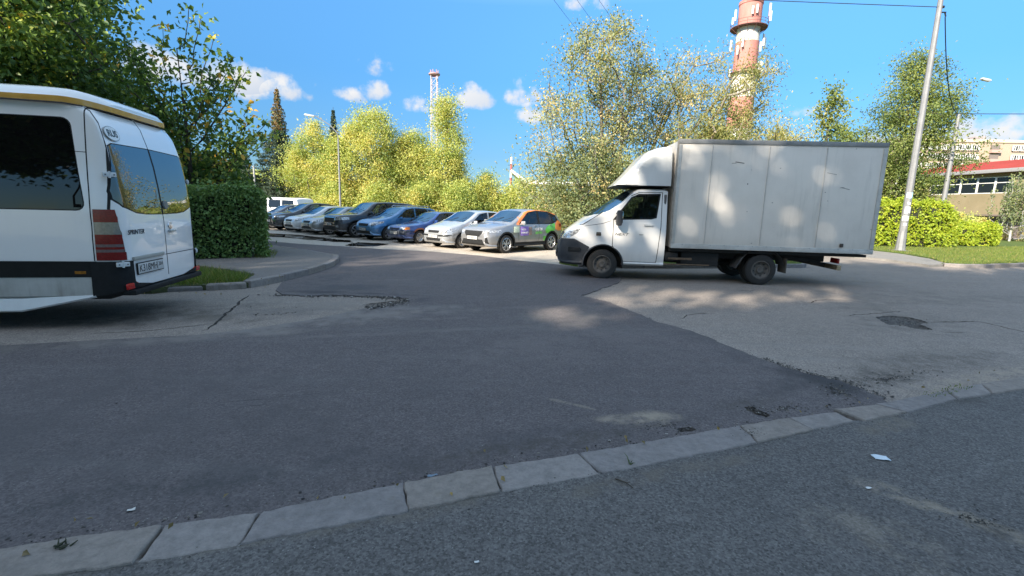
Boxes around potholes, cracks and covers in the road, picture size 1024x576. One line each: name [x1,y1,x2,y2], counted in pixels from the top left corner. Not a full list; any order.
crack [106,296,248,333]
pothole [876,316,932,330]
